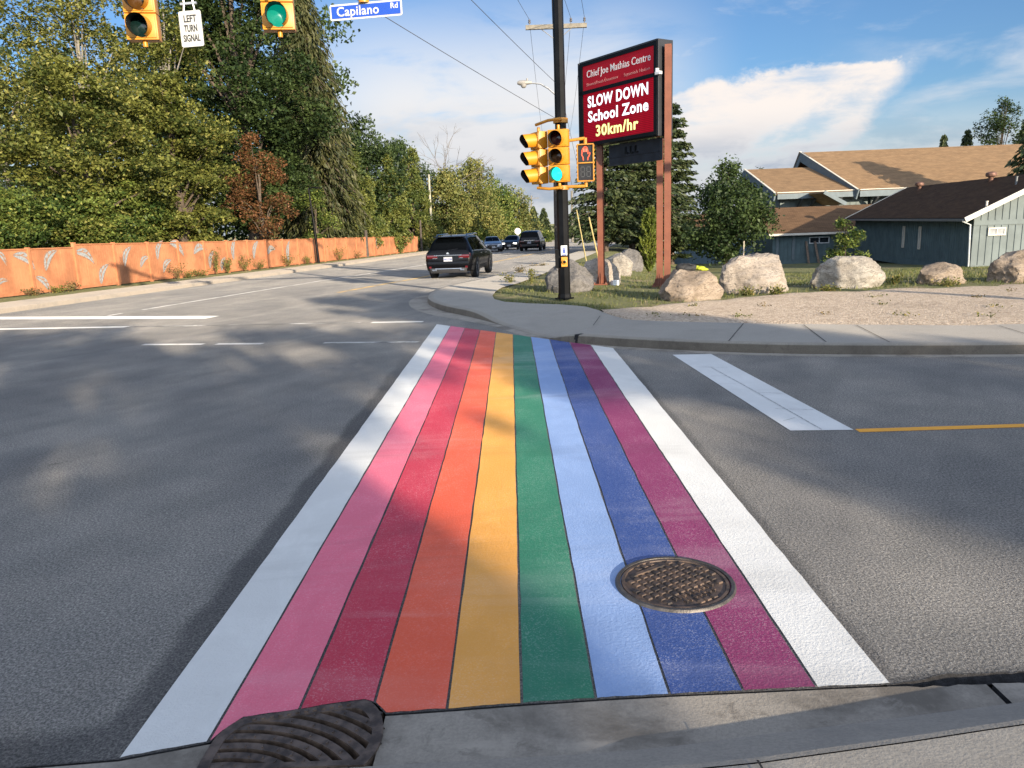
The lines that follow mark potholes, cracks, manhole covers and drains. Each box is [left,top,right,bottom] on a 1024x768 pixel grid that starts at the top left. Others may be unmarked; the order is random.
drain grate [197,700,385,768]
manhole cover [615,556,737,613]
